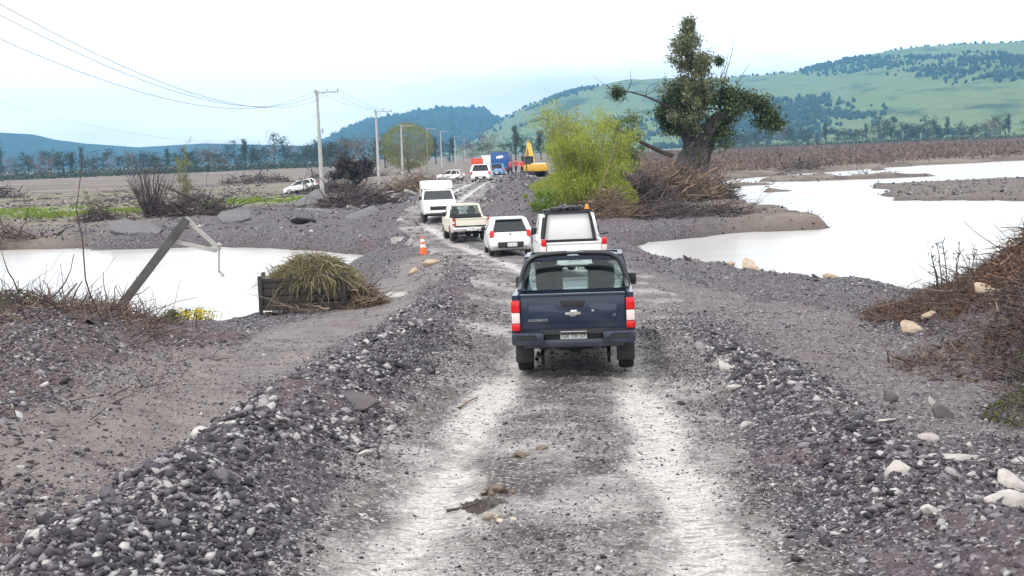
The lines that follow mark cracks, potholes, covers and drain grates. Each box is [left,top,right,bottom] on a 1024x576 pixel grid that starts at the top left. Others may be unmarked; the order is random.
pothole [455,497,514,518]
